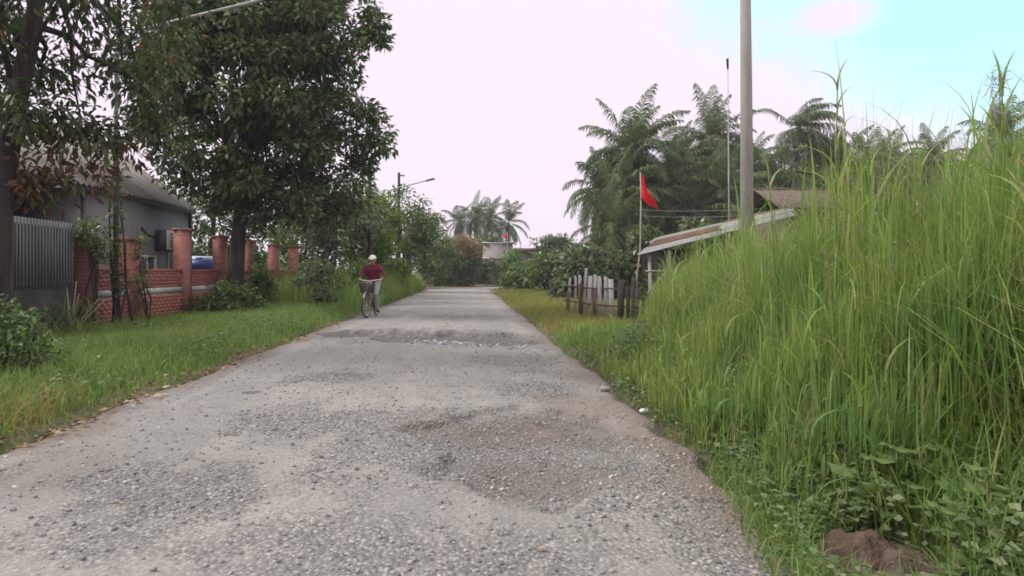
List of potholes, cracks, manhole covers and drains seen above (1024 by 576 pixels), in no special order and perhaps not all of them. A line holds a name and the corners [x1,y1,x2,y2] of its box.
pothole [311,328,548,346]
pothole [392,402,662,514]
